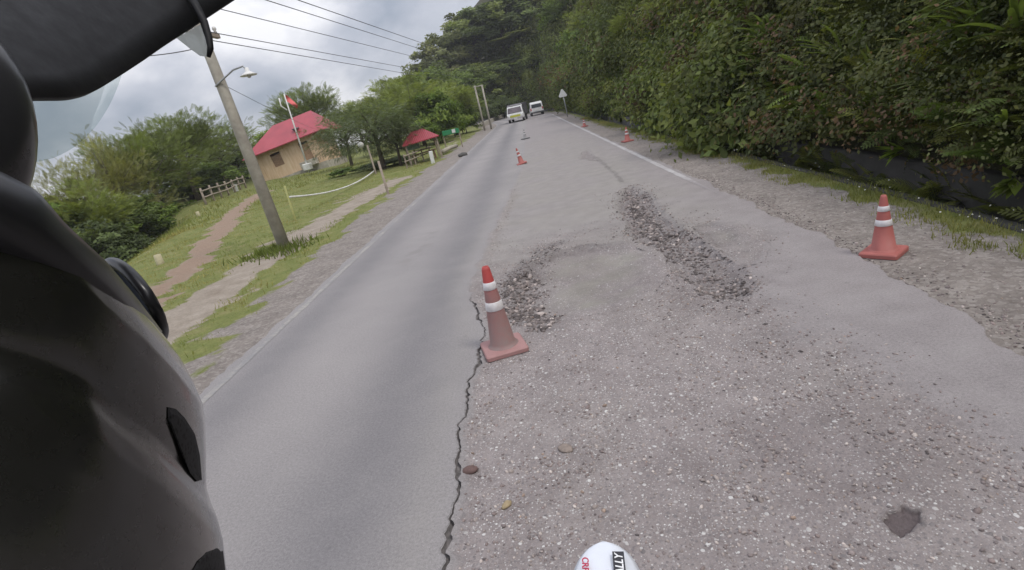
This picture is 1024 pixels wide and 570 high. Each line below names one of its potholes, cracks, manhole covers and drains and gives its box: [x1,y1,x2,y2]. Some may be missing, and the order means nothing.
pothole [613,185,759,302]
crack [593,157,623,182]
pothole [877,501,926,542]
crack [440,298,486,570]
